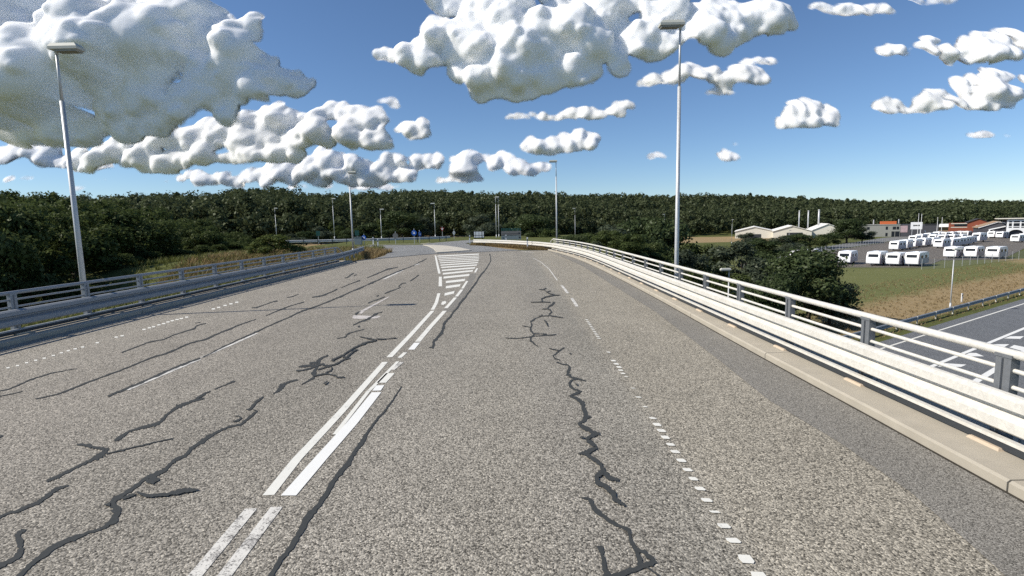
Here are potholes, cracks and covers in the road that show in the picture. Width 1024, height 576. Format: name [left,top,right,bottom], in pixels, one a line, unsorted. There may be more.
crack [0,254,563,399]
